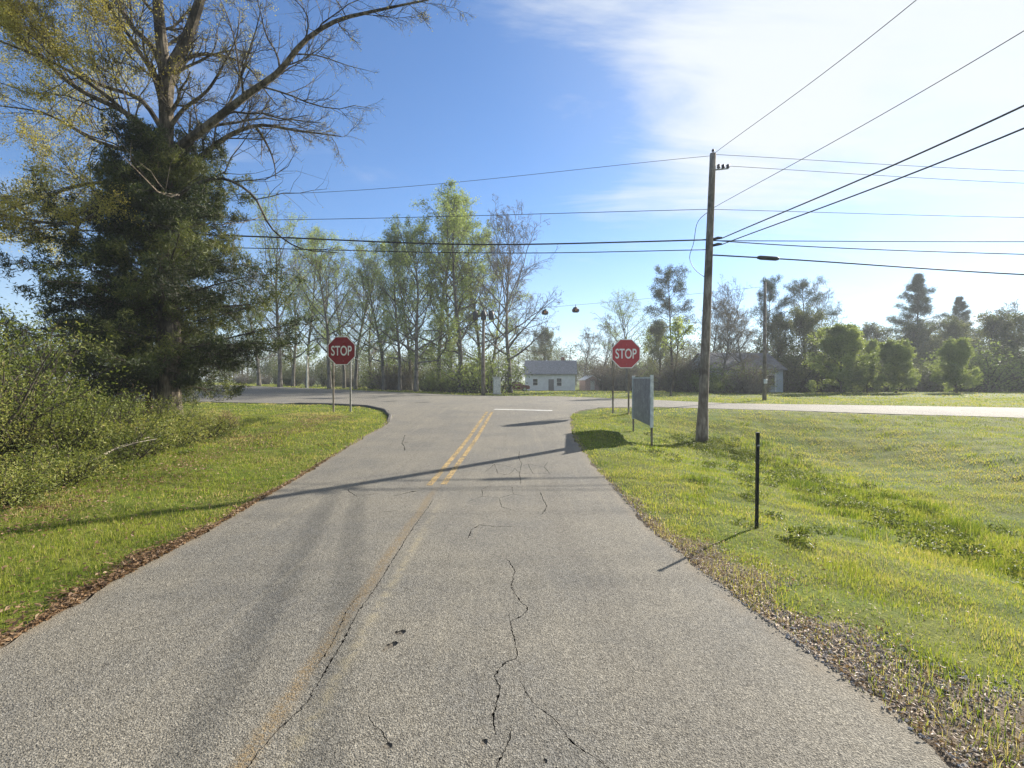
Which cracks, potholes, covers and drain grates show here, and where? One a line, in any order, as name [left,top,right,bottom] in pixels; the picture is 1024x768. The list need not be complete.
crack [467,452,549,539]
crack [492,560,608,768]
